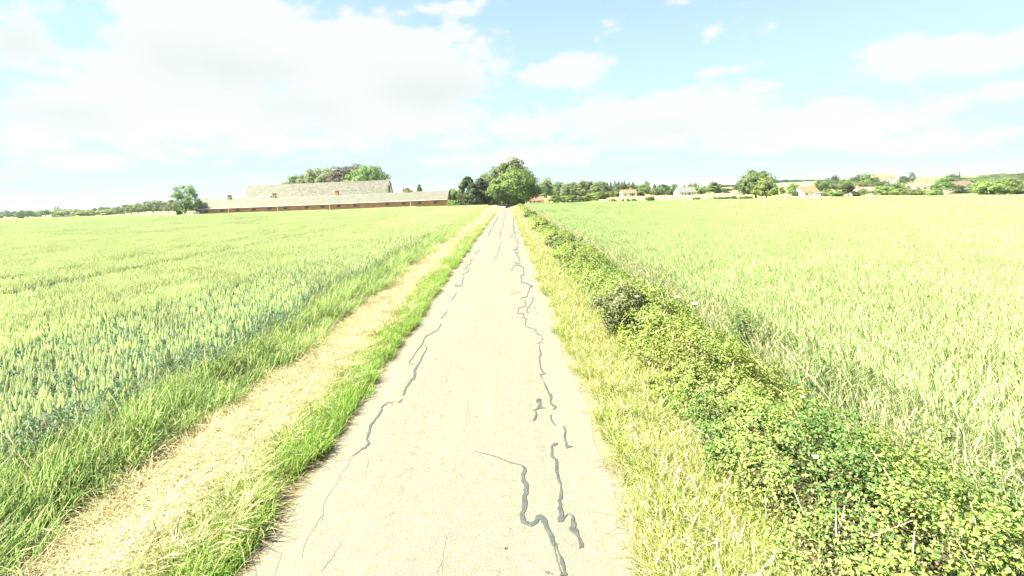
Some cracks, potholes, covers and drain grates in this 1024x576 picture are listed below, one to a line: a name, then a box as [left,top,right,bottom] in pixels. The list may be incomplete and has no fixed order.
crack [474,210,519,261]
